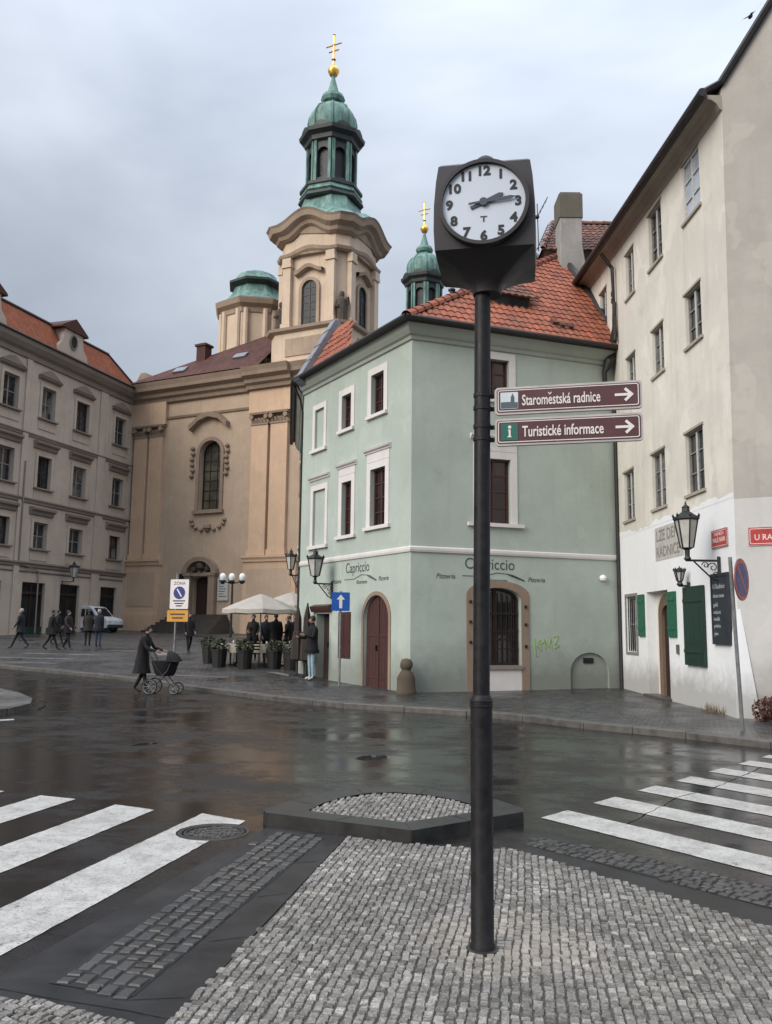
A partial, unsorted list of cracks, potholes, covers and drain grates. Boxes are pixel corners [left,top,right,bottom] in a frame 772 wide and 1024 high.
crack [628,767,761,824]
manhole cover [177,824,251,841]
